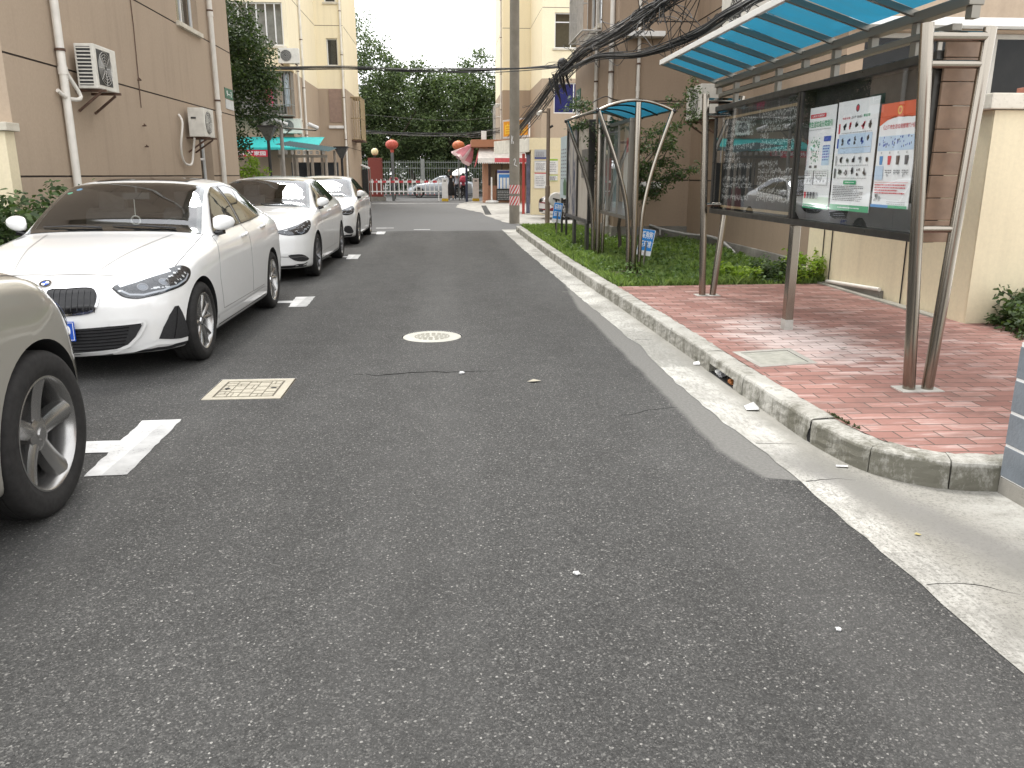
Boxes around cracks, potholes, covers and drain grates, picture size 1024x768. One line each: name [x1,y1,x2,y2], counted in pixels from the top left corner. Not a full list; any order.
manhole cover [733,348,817,367]
manhole cover [200,378,297,400]
manhole cover [402,331,462,342]
crack [926,583,1020,595]
